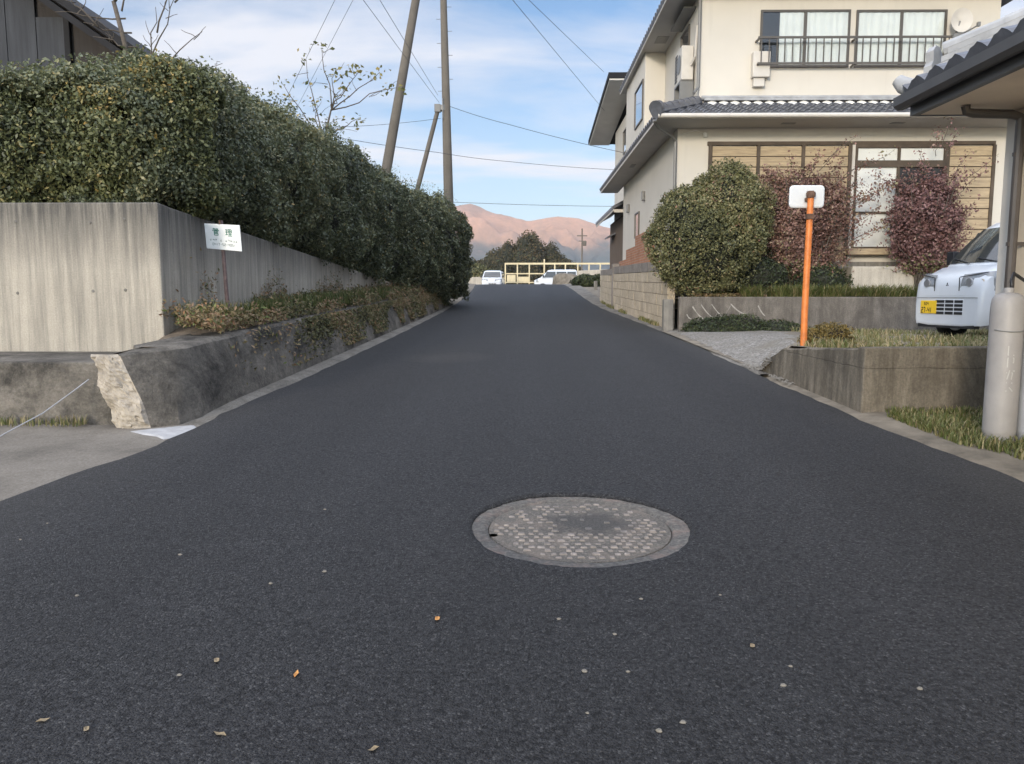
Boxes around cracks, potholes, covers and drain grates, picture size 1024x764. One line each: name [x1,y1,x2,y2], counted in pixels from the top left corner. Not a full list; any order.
manhole cover [472,497,690,568]
